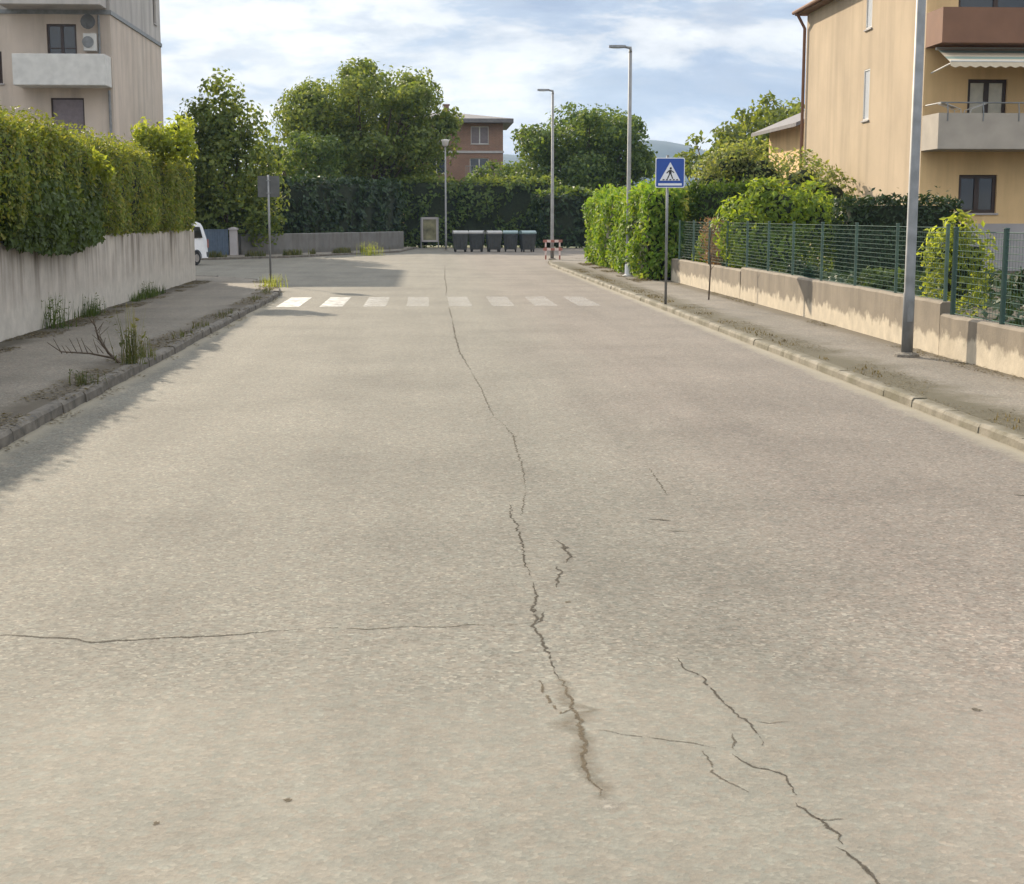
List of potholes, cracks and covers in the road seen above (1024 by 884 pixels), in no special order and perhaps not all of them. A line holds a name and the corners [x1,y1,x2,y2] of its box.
crack [325,320,880,884]
crack [5,629,298,643]
